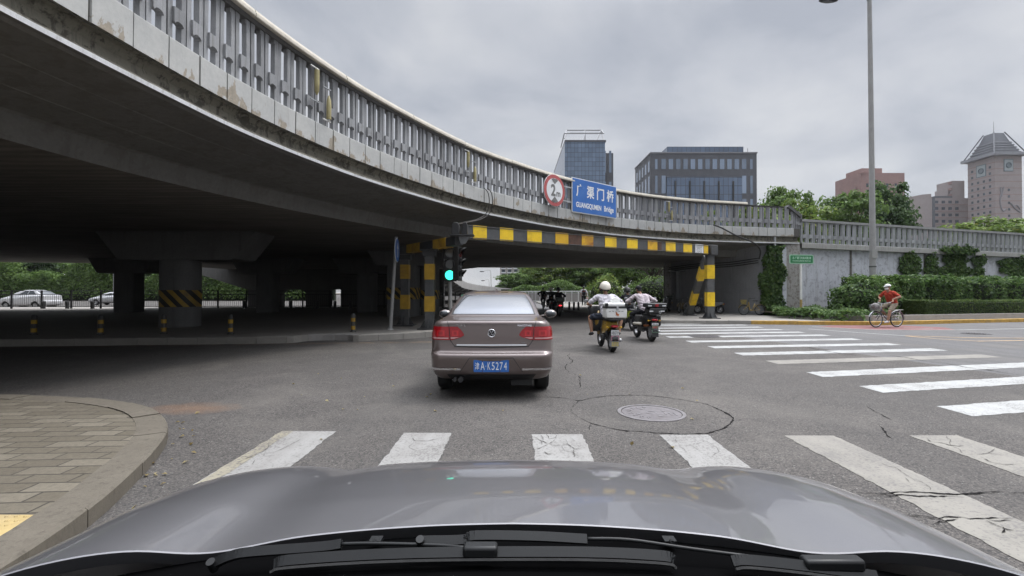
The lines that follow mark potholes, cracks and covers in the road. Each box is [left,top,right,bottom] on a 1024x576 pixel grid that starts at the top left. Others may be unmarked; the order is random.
crack [915,515,1012,532]
crack [535,351,734,461]
manhole cover [617,405,686,422]
